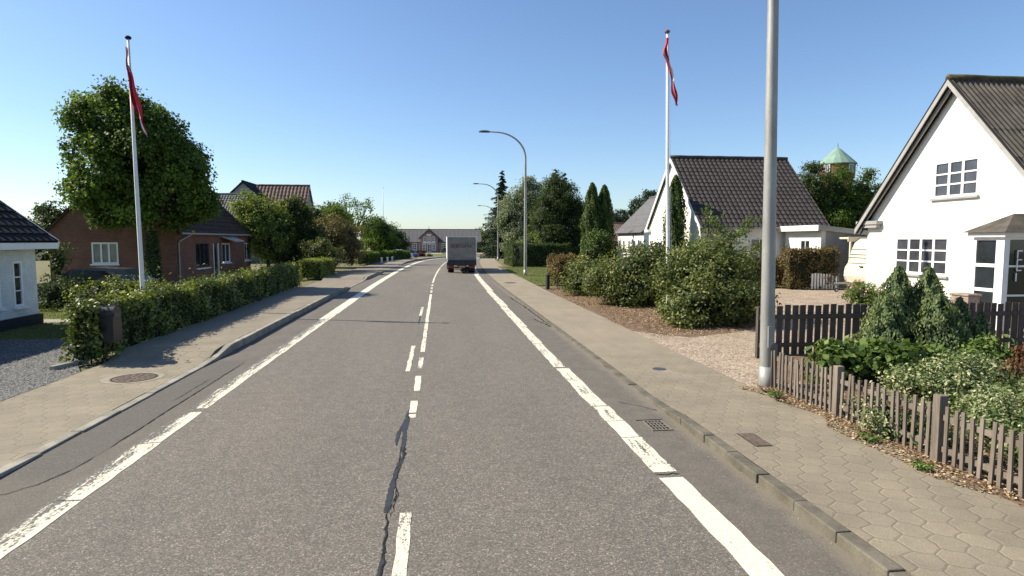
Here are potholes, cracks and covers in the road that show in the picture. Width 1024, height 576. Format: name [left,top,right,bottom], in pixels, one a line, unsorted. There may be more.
drain grate [636,419,673,431]
utility cover [737,433,773,447]
manhole cover [100,372,164,384]
